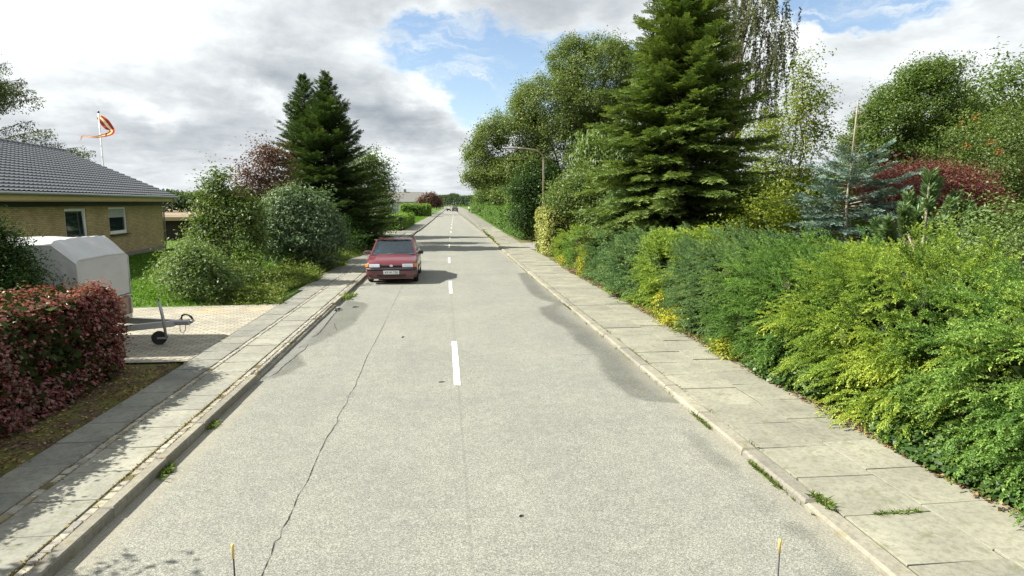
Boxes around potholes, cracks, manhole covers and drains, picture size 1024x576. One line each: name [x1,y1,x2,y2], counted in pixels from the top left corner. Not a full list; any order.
crack [261,286,403,576]
